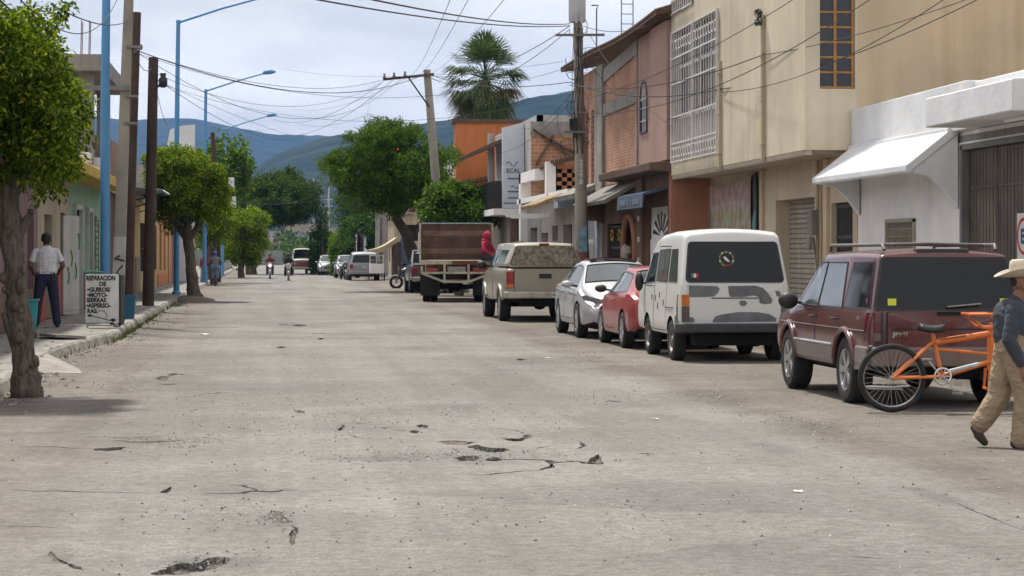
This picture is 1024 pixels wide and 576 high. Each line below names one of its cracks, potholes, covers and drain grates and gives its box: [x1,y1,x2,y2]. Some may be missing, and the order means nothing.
pothole [151,556,230,575]
pothole [468,445,510,453]
crack [459,428,596,475]
crack [201,484,283,494]
pothole [269,510,290,524]
